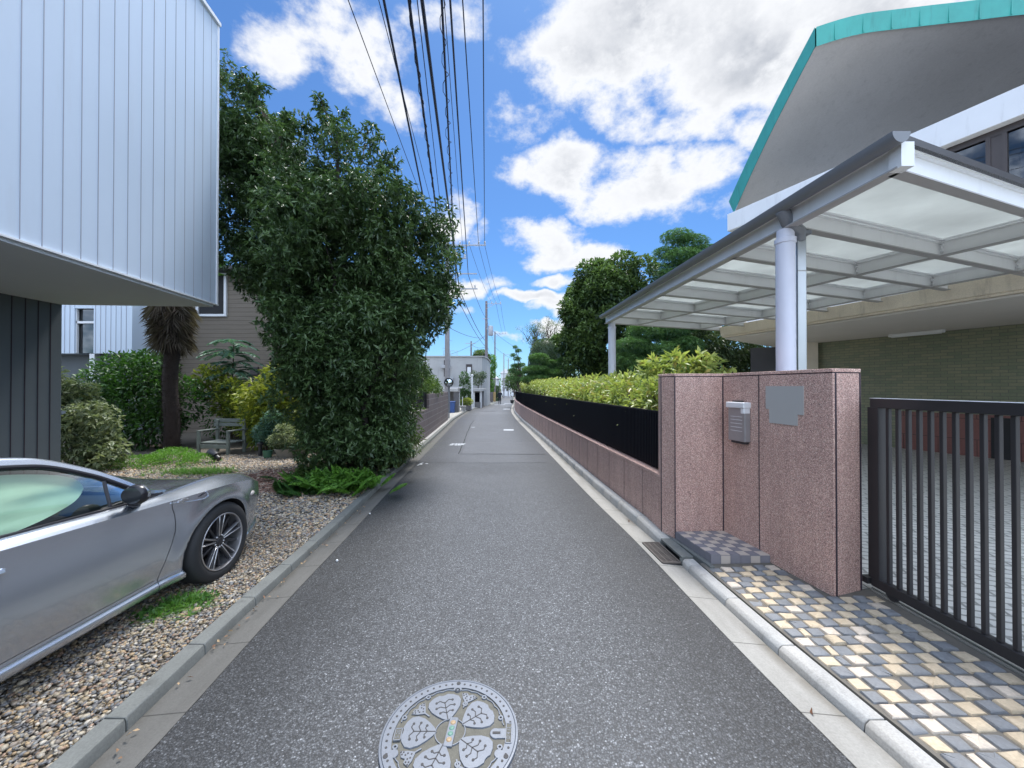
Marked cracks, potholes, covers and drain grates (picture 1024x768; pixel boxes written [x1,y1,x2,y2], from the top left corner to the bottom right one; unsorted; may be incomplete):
drain grate [642,538,693,566]
manhole cover [378,680,518,768]
